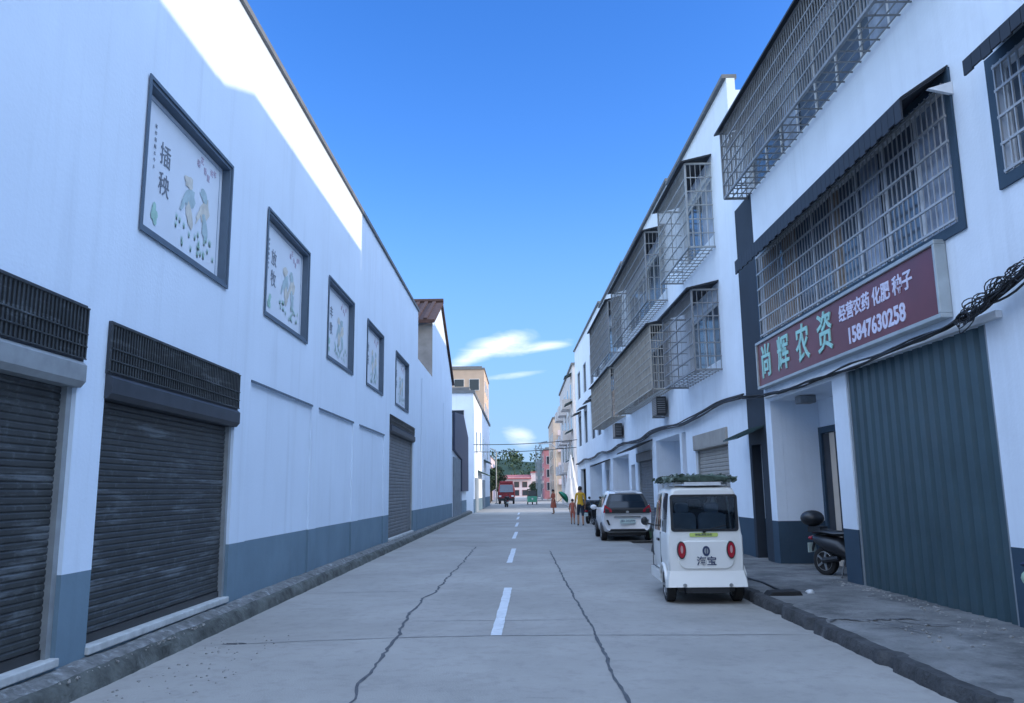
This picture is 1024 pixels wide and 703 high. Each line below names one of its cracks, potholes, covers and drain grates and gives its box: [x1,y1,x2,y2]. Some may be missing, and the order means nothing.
crack [201,547,806,703]
